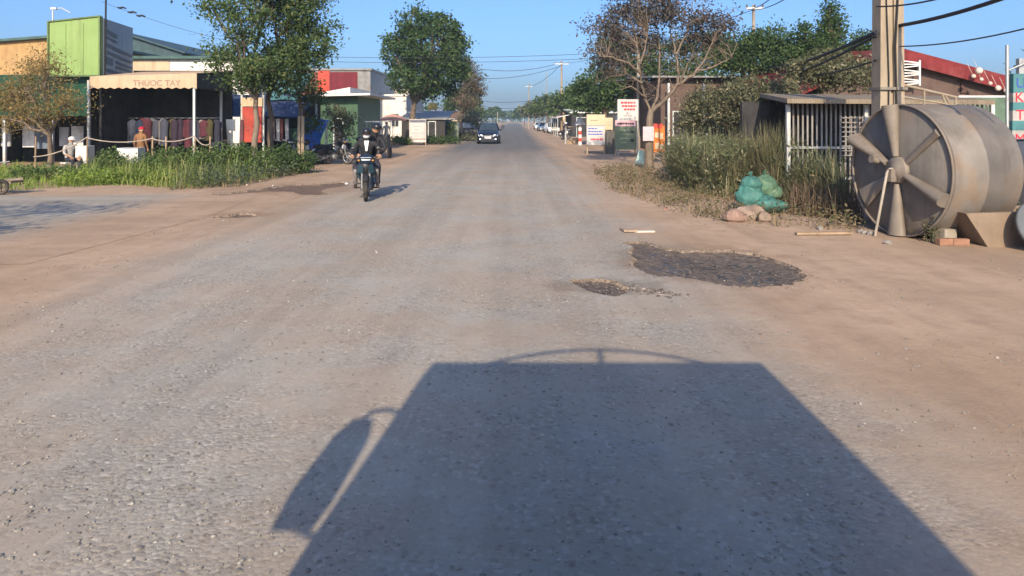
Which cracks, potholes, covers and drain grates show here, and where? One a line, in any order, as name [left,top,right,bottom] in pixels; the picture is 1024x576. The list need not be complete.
pothole [568,276,689,298]
pothole [618,240,818,292]
